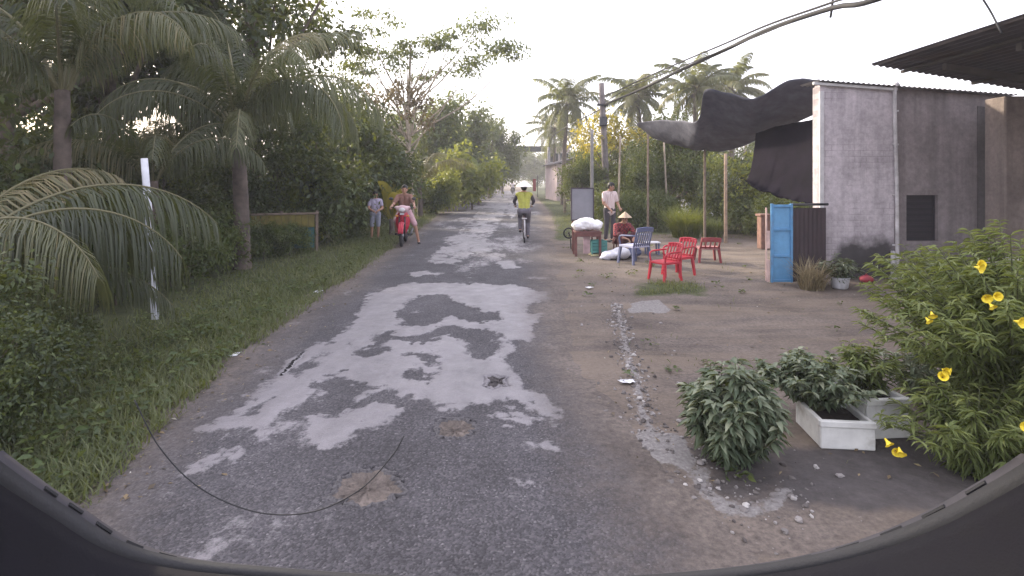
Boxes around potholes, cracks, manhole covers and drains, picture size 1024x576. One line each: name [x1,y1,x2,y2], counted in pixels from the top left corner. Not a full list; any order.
pothole [483,374,509,390]
crack [279,351,307,376]
